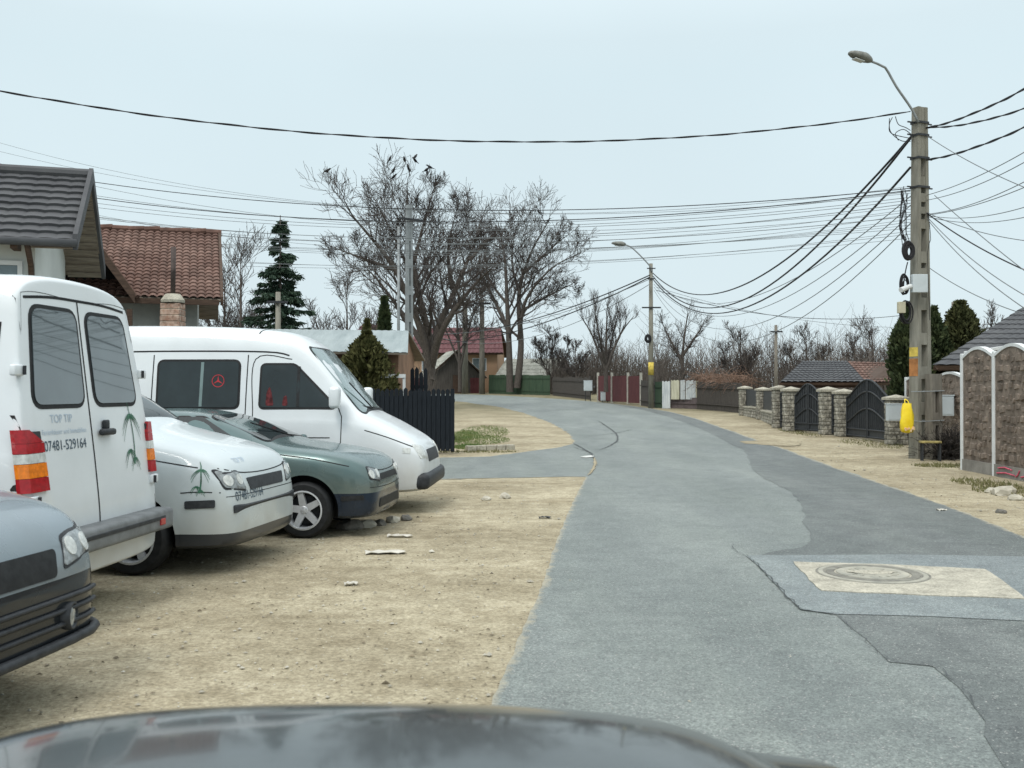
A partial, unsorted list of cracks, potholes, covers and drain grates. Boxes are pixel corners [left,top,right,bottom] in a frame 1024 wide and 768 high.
crack [846,621,984,714]
manhole cover [815,564,931,584]
